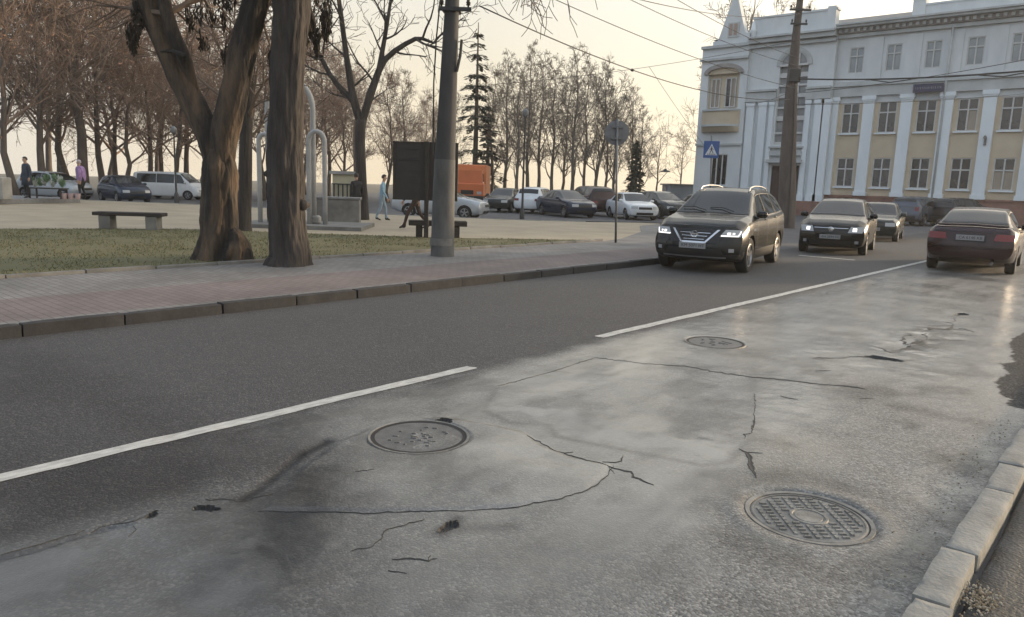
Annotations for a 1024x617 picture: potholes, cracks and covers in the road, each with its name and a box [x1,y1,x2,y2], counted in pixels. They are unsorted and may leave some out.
pothole [436,520,460,532]
crack [1,516,145,555]
manhole cover [367,420,469,454]
pothole [192,504,222,512]
crack [205,435,654,573]
manhole cover [745,491,876,547]
crack [816,319,974,371]
manhole cover [685,336,746,349]
crack [740,395,758,478]
